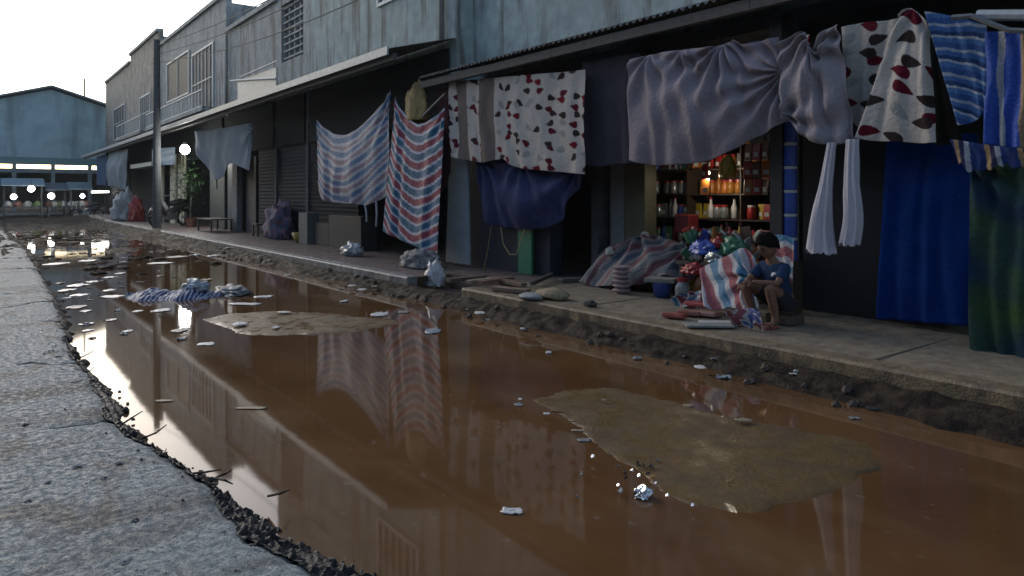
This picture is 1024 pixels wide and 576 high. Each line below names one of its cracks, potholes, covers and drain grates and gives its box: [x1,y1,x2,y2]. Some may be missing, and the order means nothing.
pothole [6,229,137,241]
pothole [34,249,1024,576]
pothole [21,238,189,255]
